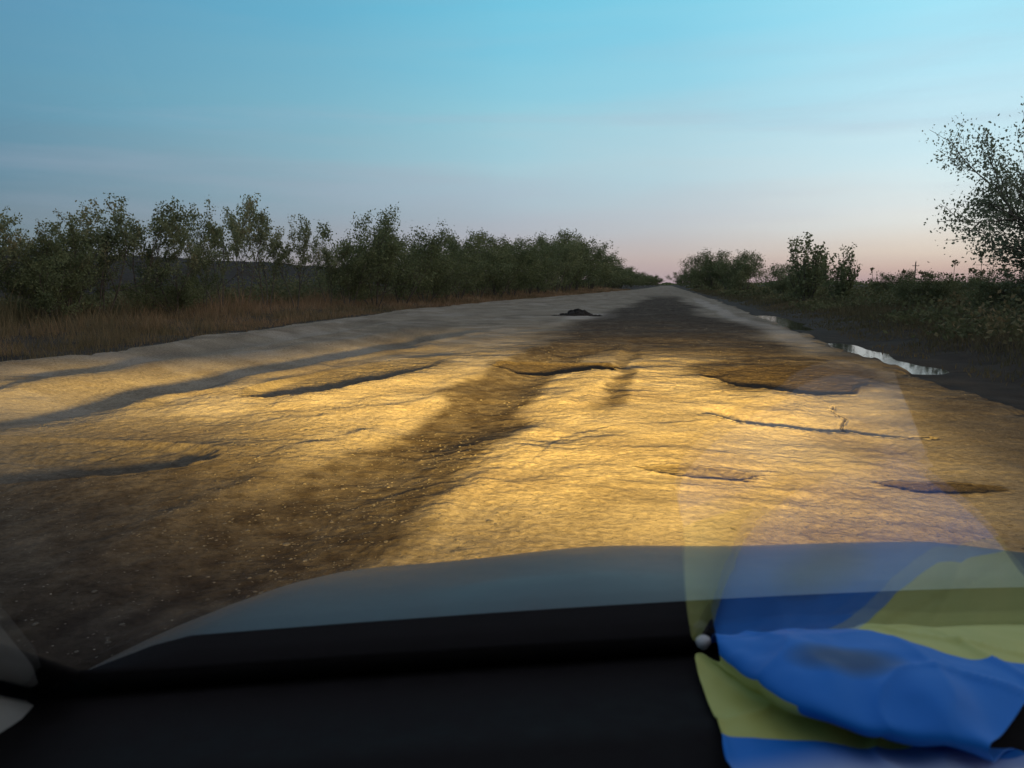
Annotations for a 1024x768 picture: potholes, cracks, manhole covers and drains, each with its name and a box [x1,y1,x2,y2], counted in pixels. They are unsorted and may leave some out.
pothole [867,481,1015,497]
crack [699,406,931,440]
pothole [237,358,448,399]
pothole [696,364,888,397]
pothole [0,434,229,487]
pothole [489,360,624,377]
pothole [629,463,768,485]
